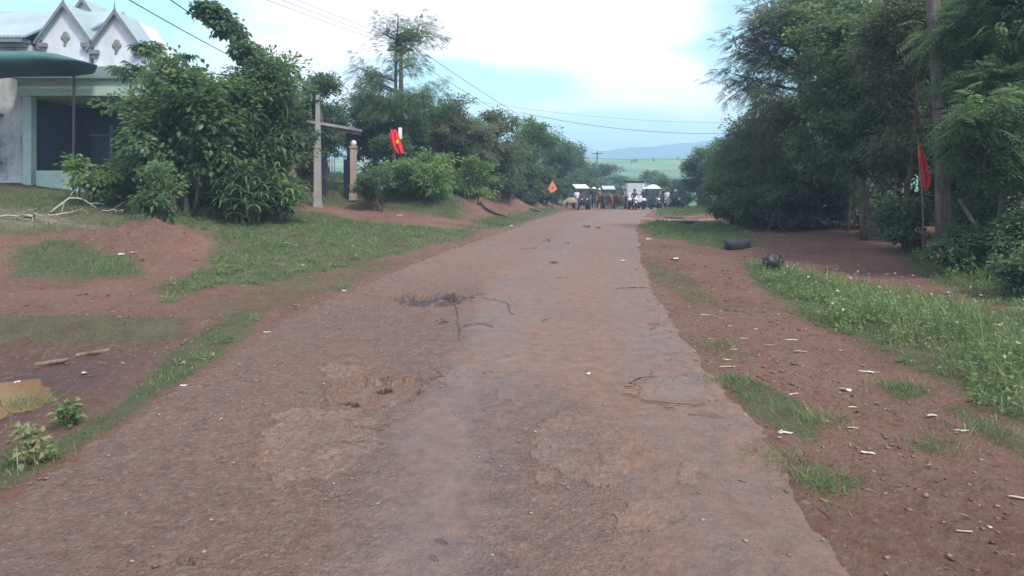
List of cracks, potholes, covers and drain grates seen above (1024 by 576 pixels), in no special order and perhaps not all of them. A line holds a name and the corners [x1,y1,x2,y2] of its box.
crack [621,376,724,418]
pothole [316,375,431,411]
crack [436,293,514,338]
pothole [394,292,468,308]
